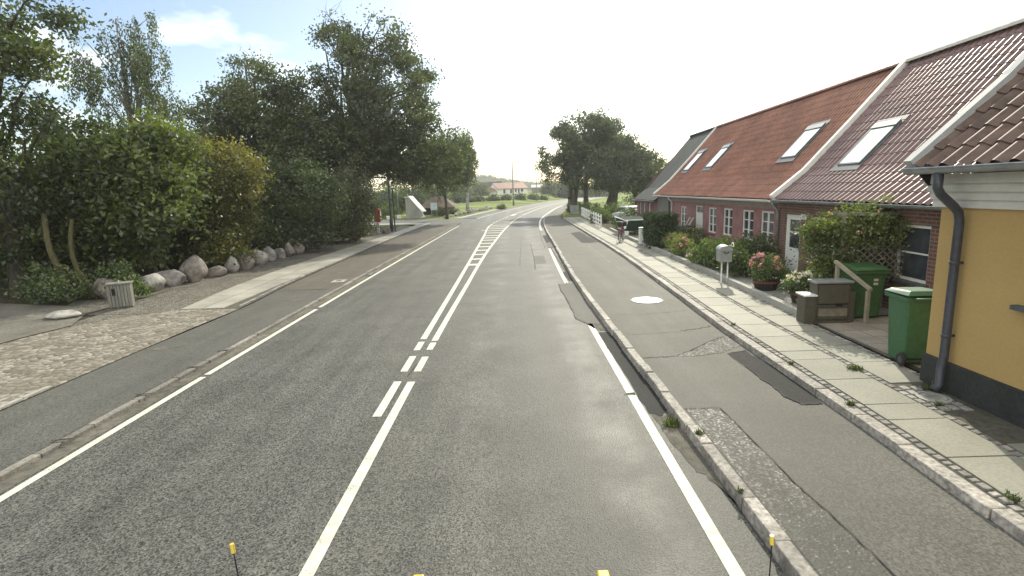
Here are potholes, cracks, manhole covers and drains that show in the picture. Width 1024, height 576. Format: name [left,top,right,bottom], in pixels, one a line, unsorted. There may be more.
crack [627,325,745,358]
